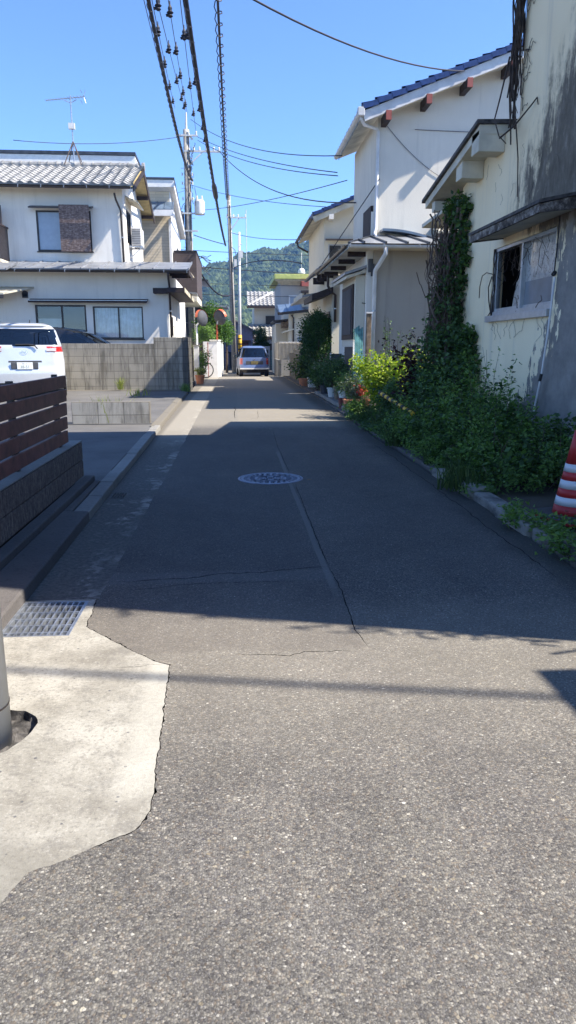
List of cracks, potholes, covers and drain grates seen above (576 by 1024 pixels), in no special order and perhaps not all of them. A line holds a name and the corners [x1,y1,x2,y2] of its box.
drain grate [2,601,89,637]
manhole cover [238,472,303,484]
crack [118,407,367,656]
